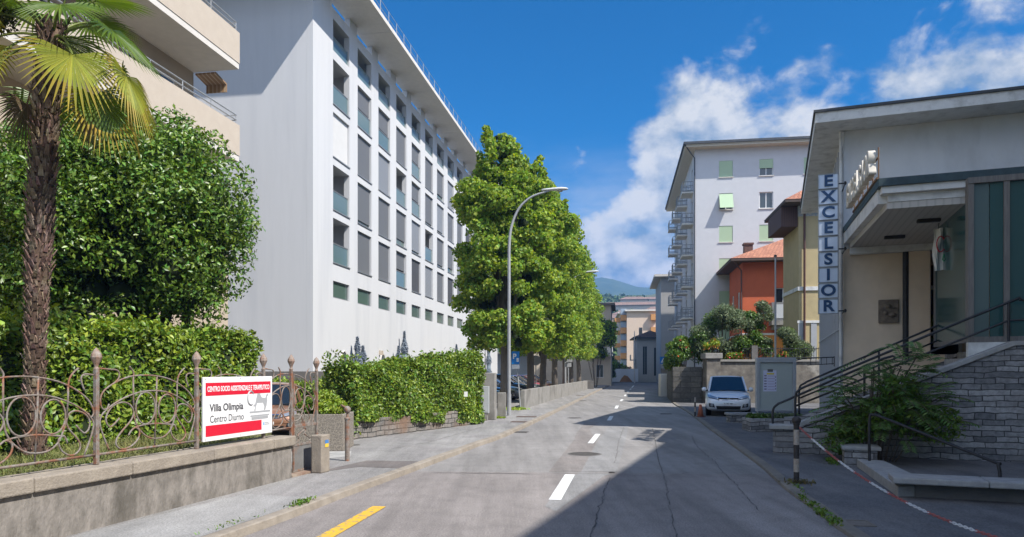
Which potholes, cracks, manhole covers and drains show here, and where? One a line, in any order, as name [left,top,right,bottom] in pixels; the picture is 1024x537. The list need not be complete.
crack [590,477,611,537]
crack [652,429,678,537]
